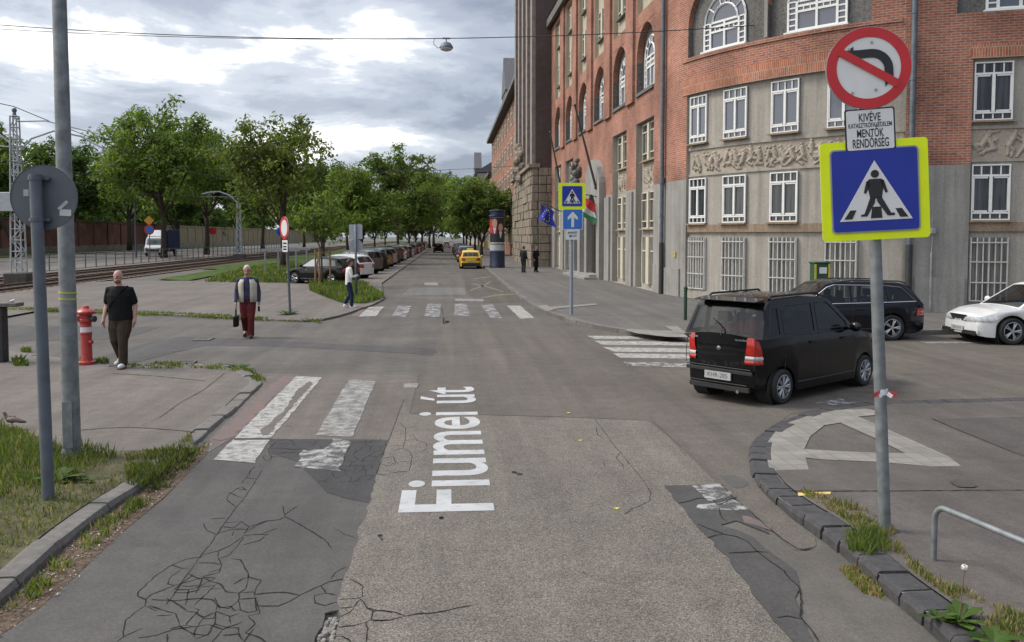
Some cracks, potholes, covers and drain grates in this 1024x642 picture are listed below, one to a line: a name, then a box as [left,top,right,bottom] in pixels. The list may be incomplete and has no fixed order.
crack [263,400,427,483]
crack [118,467,355,642]
crack [595,420,651,514]
